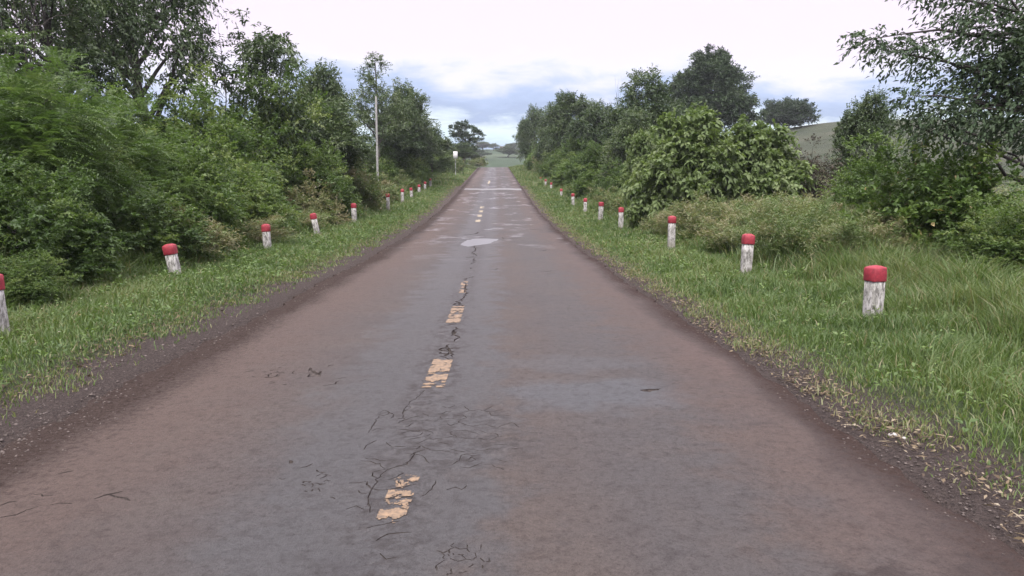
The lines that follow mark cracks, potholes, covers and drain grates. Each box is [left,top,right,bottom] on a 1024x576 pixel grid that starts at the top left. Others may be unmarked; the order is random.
crack [0,471,72,518]
crack [95,491,131,501]
crack [435,543,491,575]
